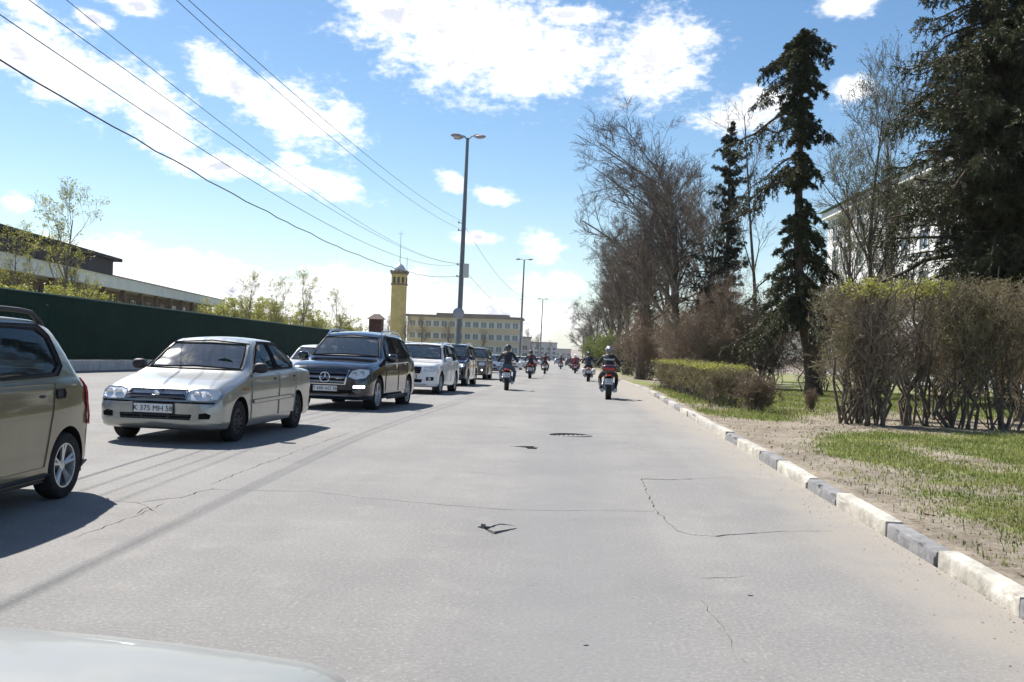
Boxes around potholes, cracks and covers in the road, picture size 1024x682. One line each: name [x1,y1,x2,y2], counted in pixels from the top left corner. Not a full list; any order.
pothole [478,524,517,534]
crack [75,433,585,538]
crack [641,478,782,537]
